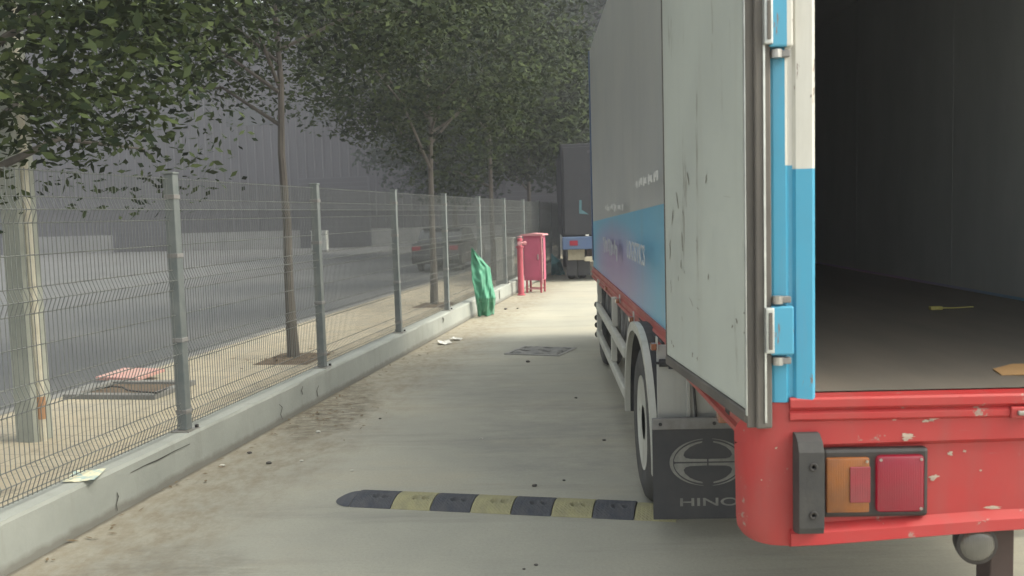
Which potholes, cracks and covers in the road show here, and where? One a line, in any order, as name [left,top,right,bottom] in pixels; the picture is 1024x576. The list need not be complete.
manhole cover [504,346,577,356]
